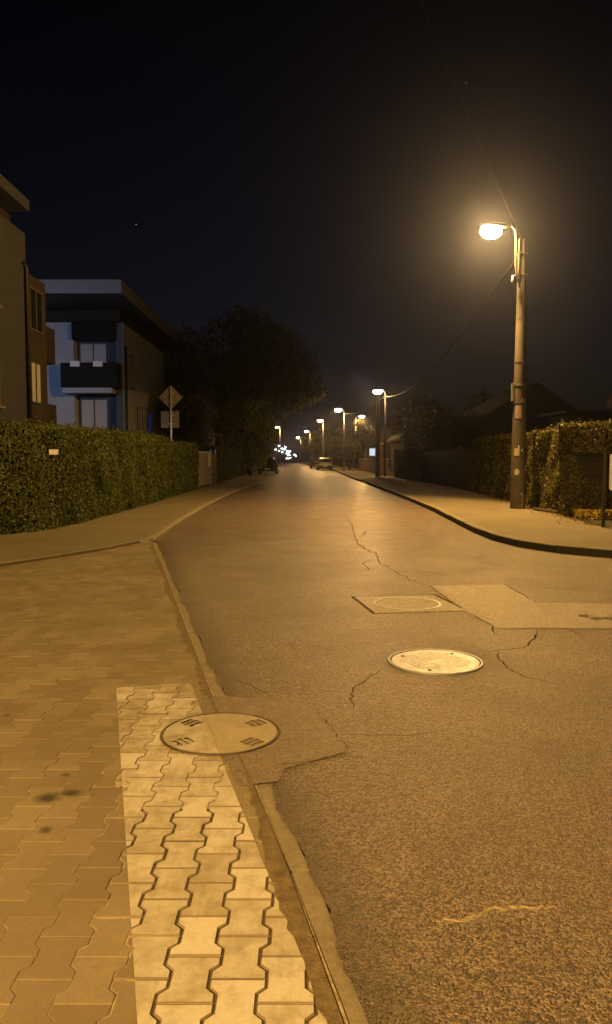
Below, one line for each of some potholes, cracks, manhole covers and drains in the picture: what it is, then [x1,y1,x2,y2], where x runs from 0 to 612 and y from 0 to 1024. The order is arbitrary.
crack [436,905,556,923]
manhole cover [388,649,483,675]
manhole cover [160,712,281,757]
crack [348,521,425,585]
crack [489,631,556,684]
manhole cover [354,595,465,614]
